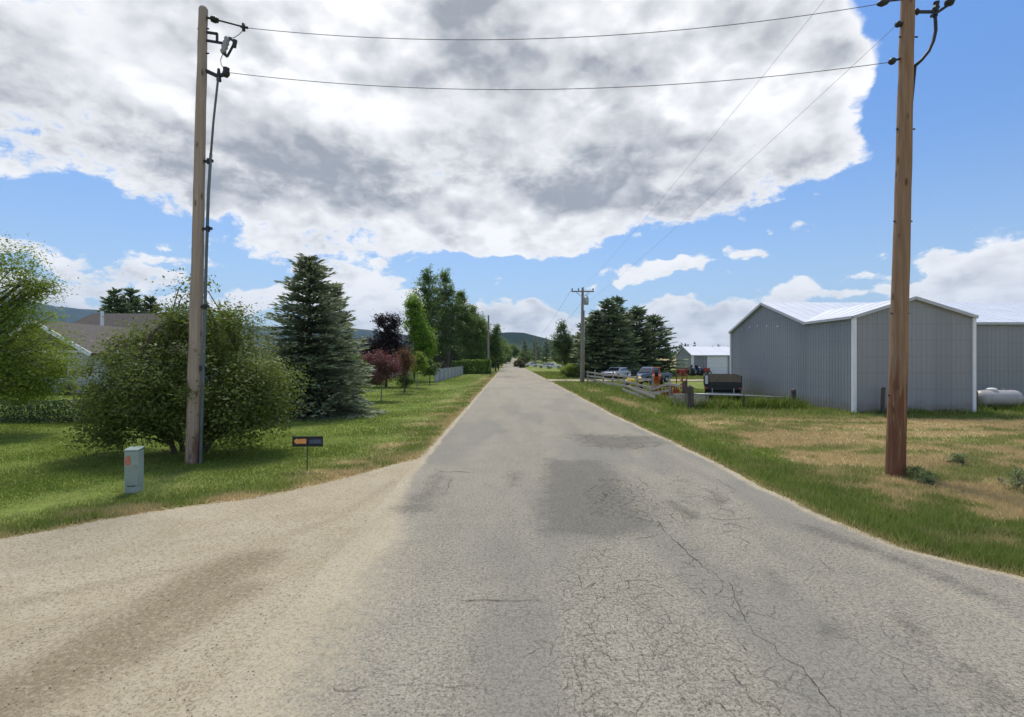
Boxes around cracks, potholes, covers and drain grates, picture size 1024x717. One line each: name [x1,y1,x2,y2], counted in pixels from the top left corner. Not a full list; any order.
crack [541,548,736,717]
crack [583,471,840,715]
